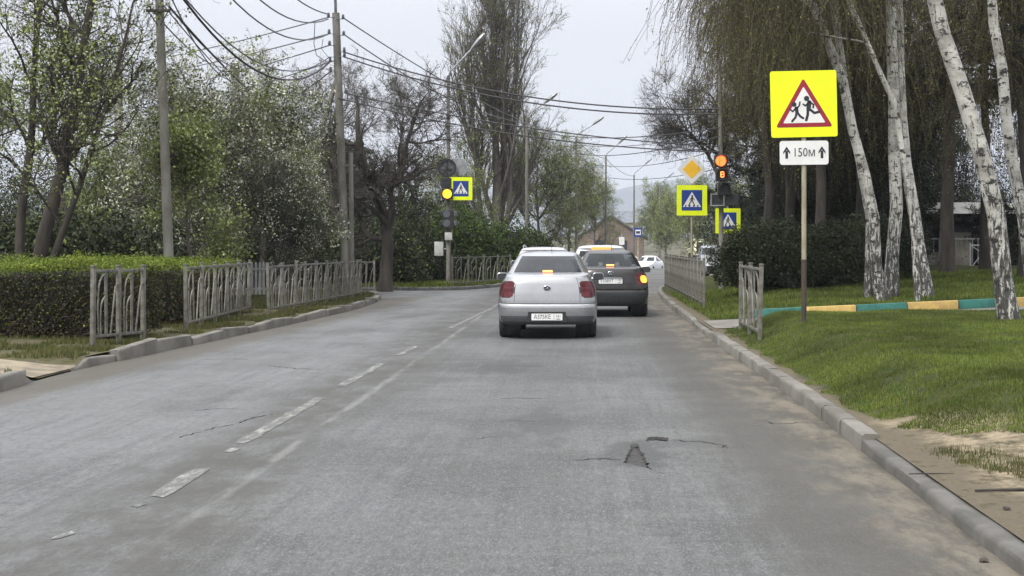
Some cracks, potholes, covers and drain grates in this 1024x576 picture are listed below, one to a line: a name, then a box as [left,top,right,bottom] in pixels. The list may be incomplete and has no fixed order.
pothole [623,443,651,469]
crack [576,440,727,474]
crack [179,408,272,438]
